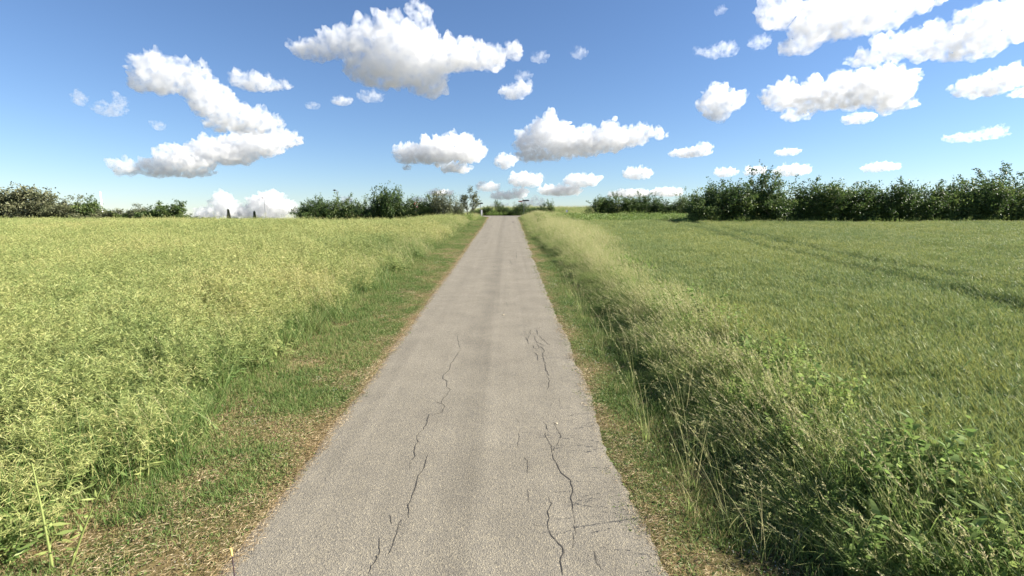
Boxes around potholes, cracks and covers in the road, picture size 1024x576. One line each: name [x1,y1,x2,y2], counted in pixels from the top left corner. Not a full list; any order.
crack [368,336,460,574]
crack [538,423,576,573]
